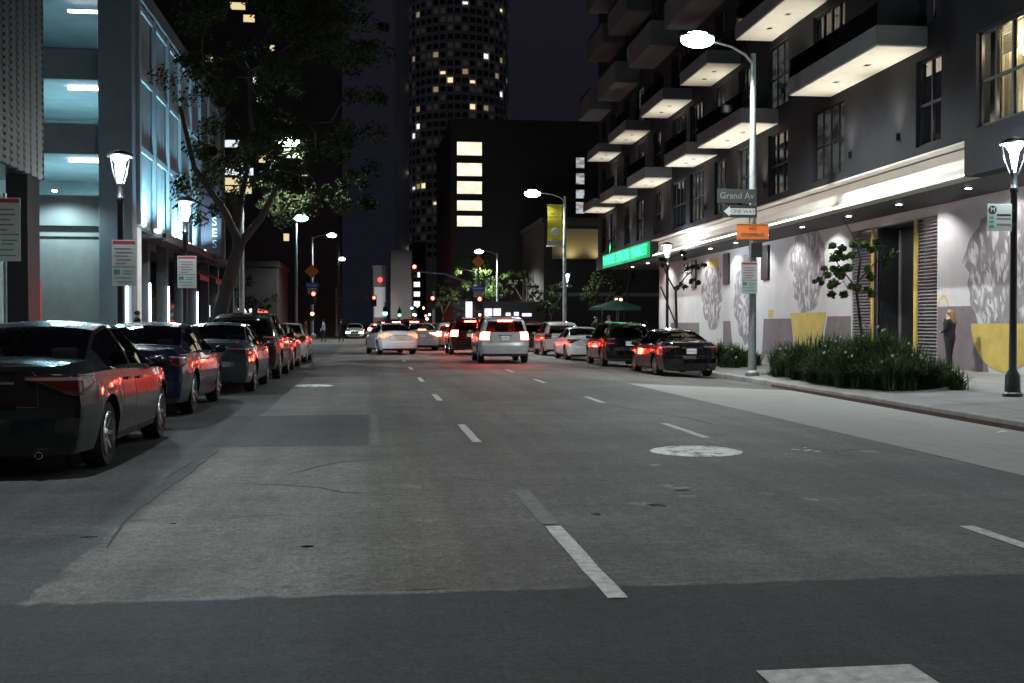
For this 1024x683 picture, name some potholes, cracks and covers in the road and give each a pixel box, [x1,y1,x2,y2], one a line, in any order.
crack [106,450,268,548]
manhole cover [650,446,742,457]
crack [243,460,367,493]
